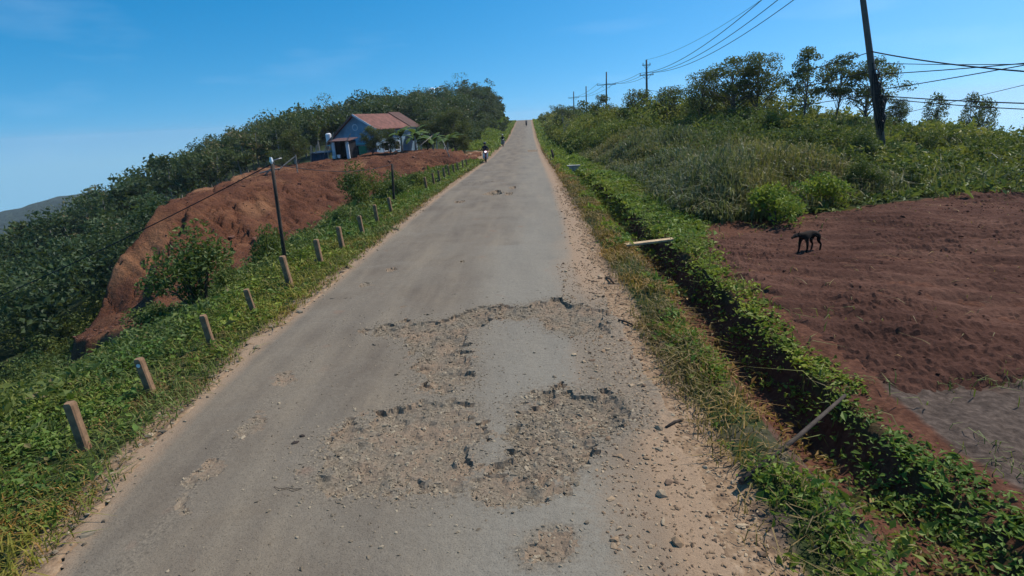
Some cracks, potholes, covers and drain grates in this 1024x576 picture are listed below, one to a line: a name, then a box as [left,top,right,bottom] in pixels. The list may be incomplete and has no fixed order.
pothole [293,397,498,501]
pothole [465,468,573,509]
pothole [484,381,676,490]
pothole [520,526,580,564]
pothole [189,458,228,481]
pothole [172,475,199,517]
